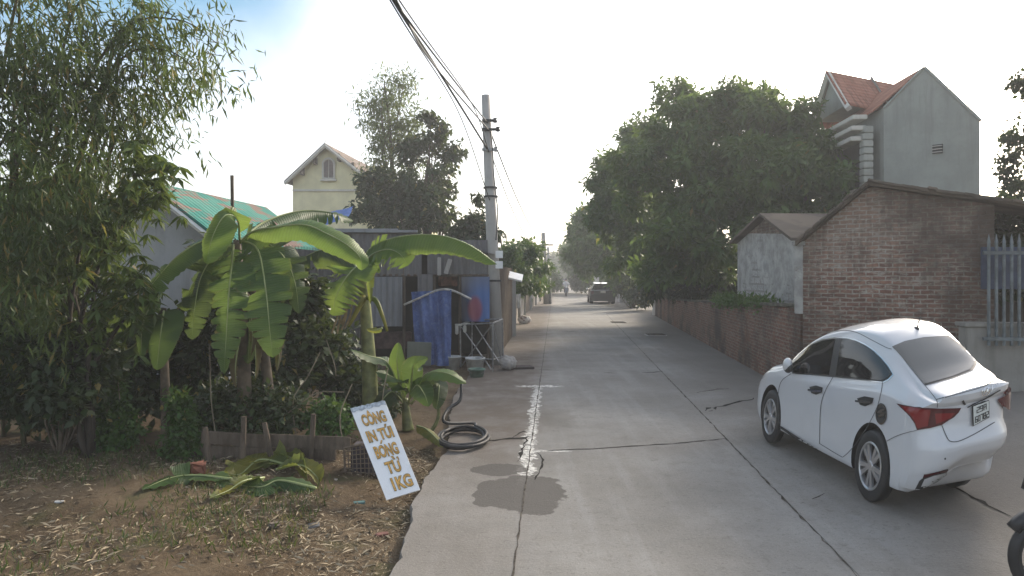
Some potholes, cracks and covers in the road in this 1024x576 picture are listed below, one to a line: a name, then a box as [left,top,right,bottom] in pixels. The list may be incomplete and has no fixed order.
crack [489,430,544,479]
crack [697,388,754,411]
crack [954,487,1010,516]
